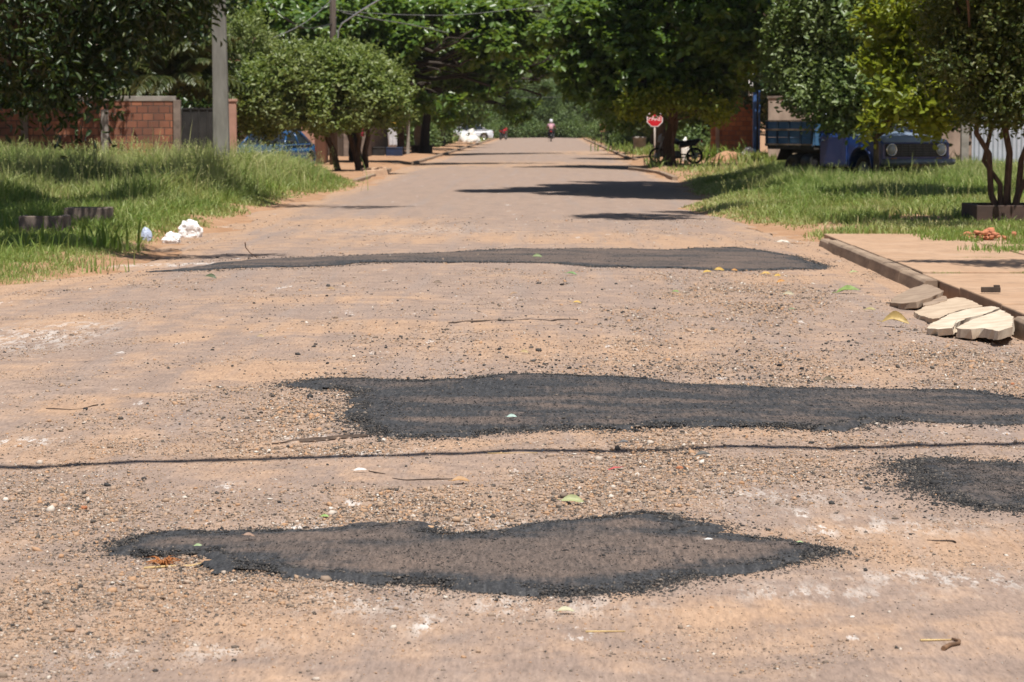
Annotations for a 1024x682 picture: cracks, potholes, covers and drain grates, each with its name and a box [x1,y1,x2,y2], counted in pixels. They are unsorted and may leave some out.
crack [272,434,368,444]
